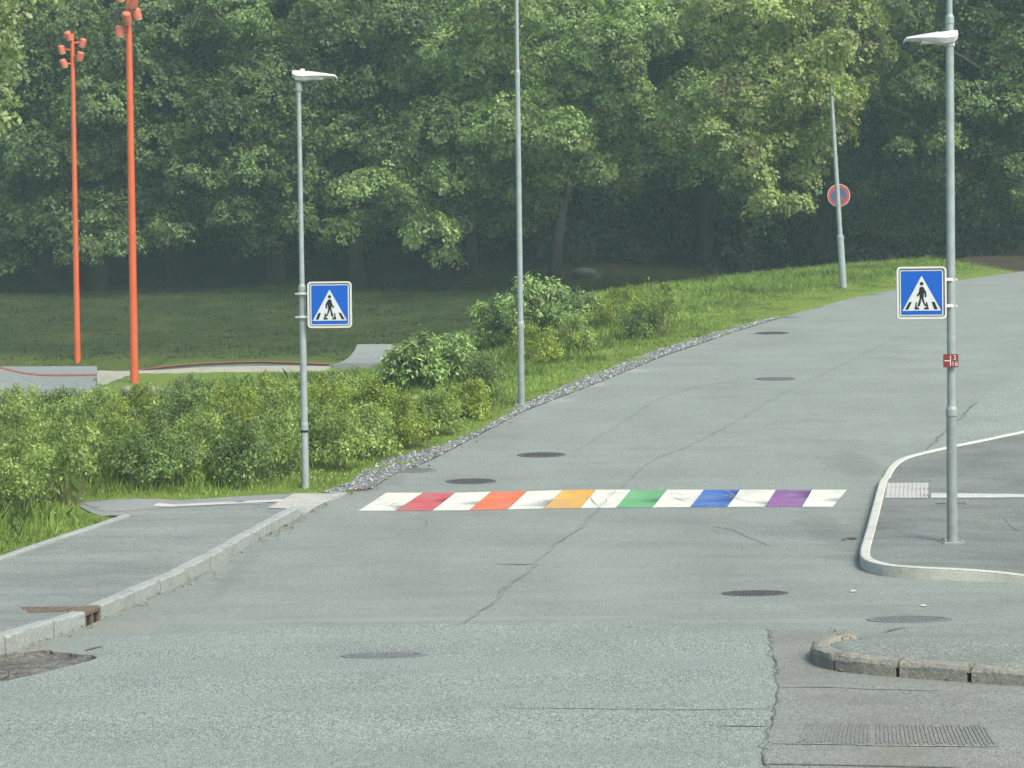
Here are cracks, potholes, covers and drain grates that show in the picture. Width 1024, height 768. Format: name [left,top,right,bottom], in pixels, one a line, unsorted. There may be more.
crack [453,329,925,629]
crack [926,402,977,451]
manhole cover [866,615,952,623]
drain grate [20,606,101,627]
